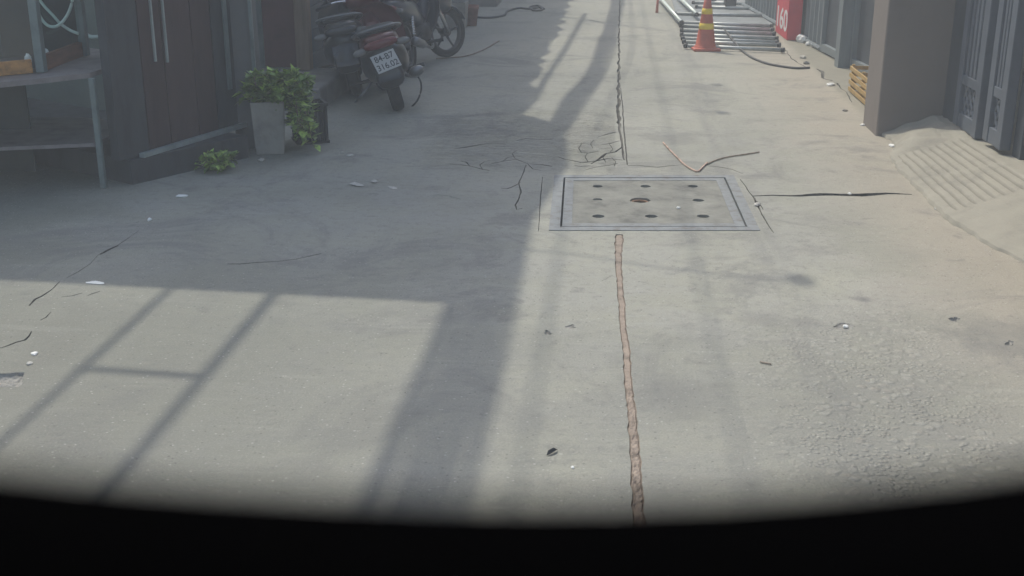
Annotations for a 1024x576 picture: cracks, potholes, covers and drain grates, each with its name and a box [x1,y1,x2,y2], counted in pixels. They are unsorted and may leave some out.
crack [455,138,552,210]
crack [1,231,138,348]
manhole cover [549,175,760,236]
crack [560,132,743,174]
